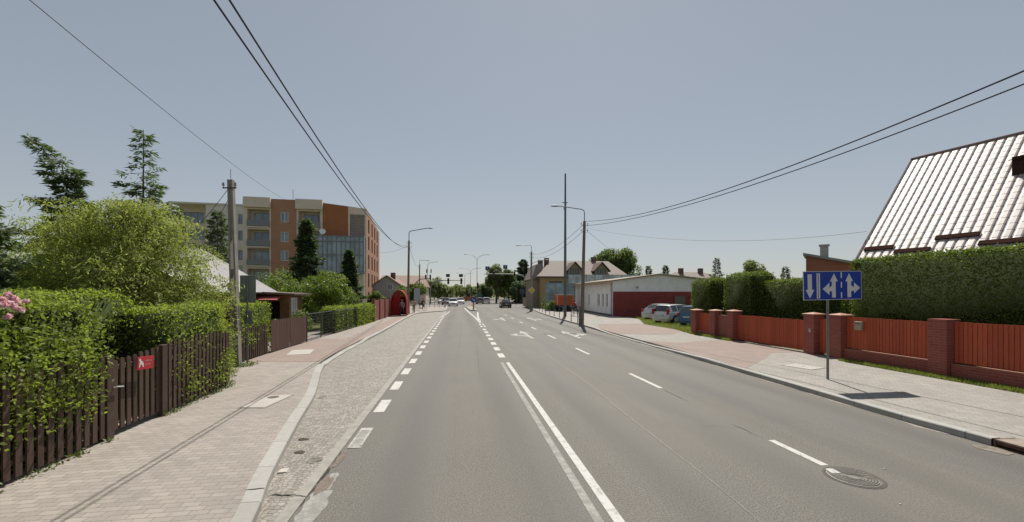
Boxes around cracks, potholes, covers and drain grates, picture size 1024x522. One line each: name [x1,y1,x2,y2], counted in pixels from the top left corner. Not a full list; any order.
manhole cover [822,466,888,489]
manhole cover [239,395,293,408]
